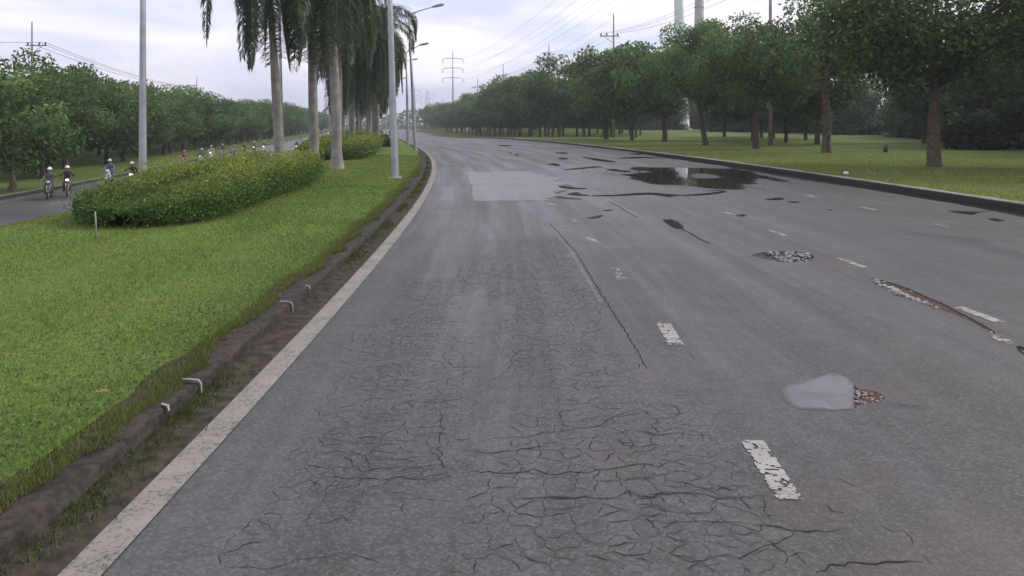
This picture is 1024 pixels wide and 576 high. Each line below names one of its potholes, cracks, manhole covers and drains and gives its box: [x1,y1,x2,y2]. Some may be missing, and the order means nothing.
crack [447,236,847,574]
pothole [752,251,814,263]
crack [817,525,932,572]
pothole [663,219,684,229]
pothole [871,278,995,333]
crack [219,277,480,570]
